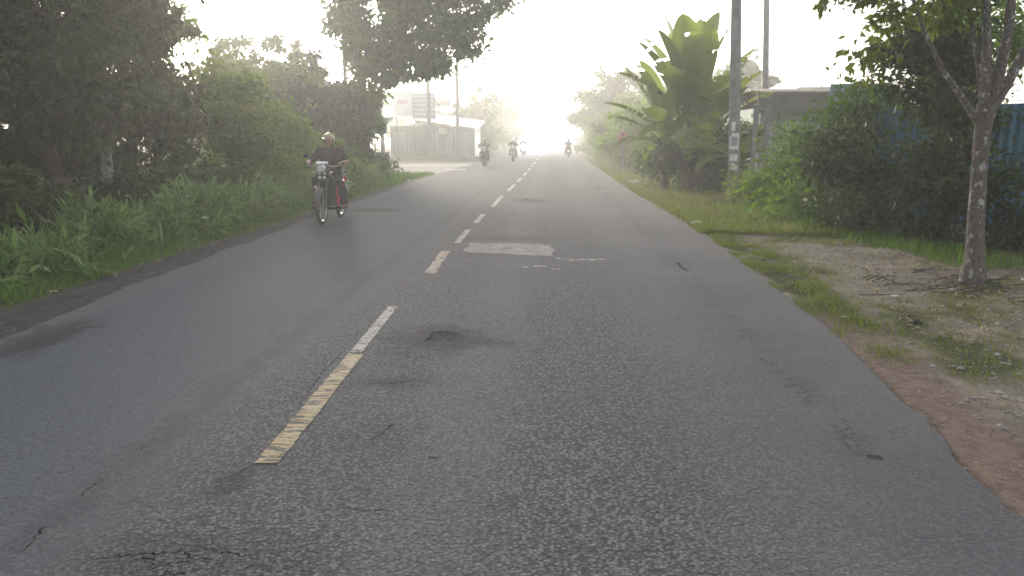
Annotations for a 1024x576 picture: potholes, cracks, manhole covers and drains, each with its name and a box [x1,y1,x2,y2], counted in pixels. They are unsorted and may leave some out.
crack [327,507,390,515]
crack [94,548,257,576]
pothole [423,331,465,345]
